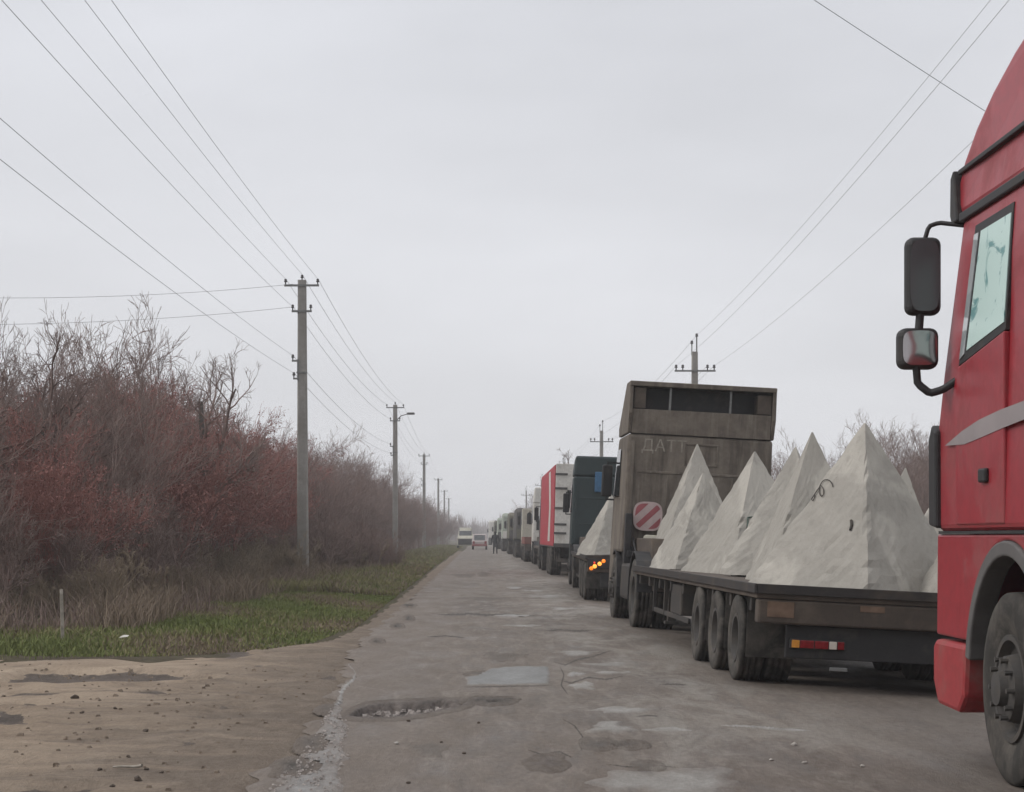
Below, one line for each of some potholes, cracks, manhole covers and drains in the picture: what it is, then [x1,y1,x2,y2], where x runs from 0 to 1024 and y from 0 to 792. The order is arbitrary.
crack [528,719,583,757]
pothole [460,695,522,707]
crack [290,664,356,790]
crack [555,650,622,693]
pothole [337,696,475,722]
